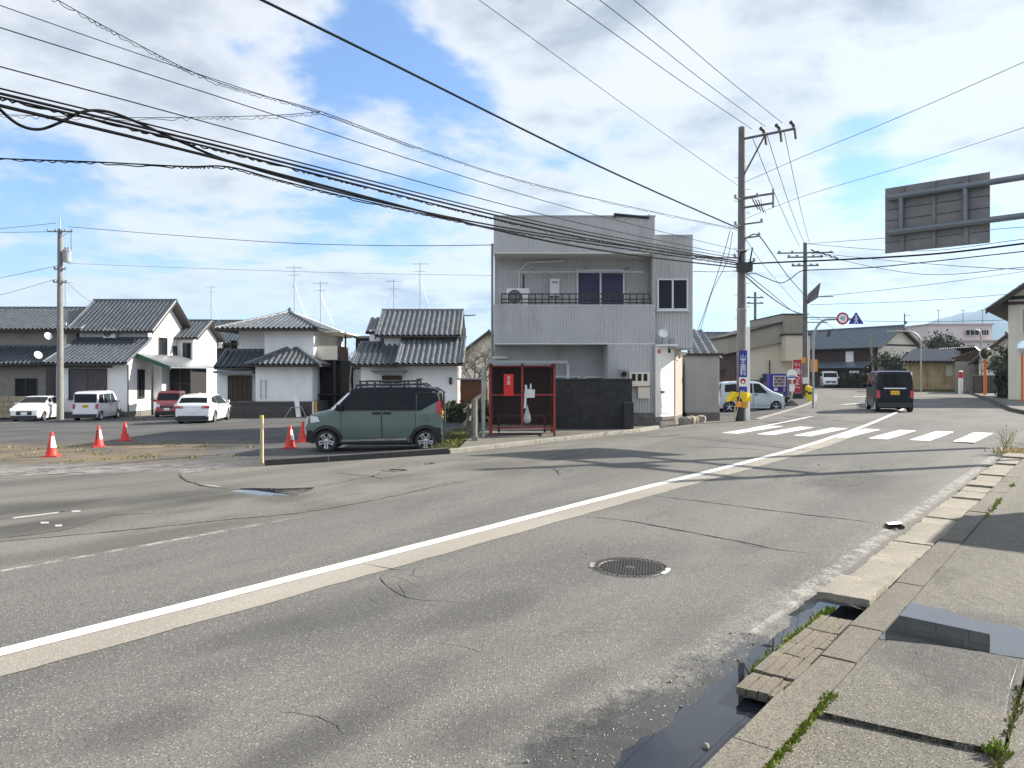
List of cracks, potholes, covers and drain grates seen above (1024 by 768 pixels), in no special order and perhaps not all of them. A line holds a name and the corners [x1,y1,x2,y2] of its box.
crack [369,567,469,604]
crack [177,473,225,489]
pothole [228,487,314,497]
manhole cover [589,557,670,578]
crack [588,516,803,553]
